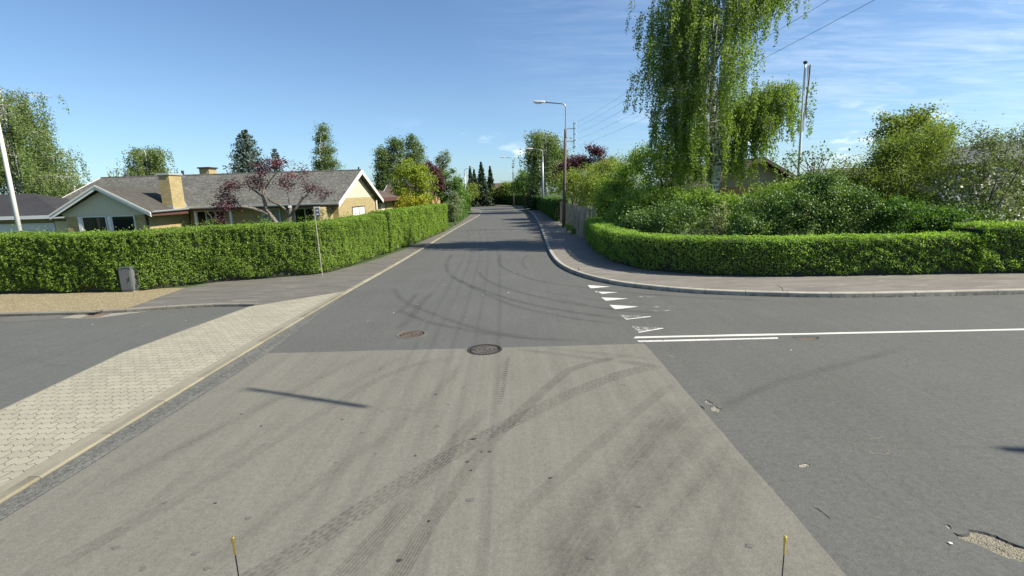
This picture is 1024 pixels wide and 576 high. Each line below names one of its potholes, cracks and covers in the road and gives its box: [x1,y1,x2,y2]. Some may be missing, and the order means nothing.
pothole [954,529,1024,563]
manhole cover [397,330,427,339]
manhole cover [467,344,502,355]
